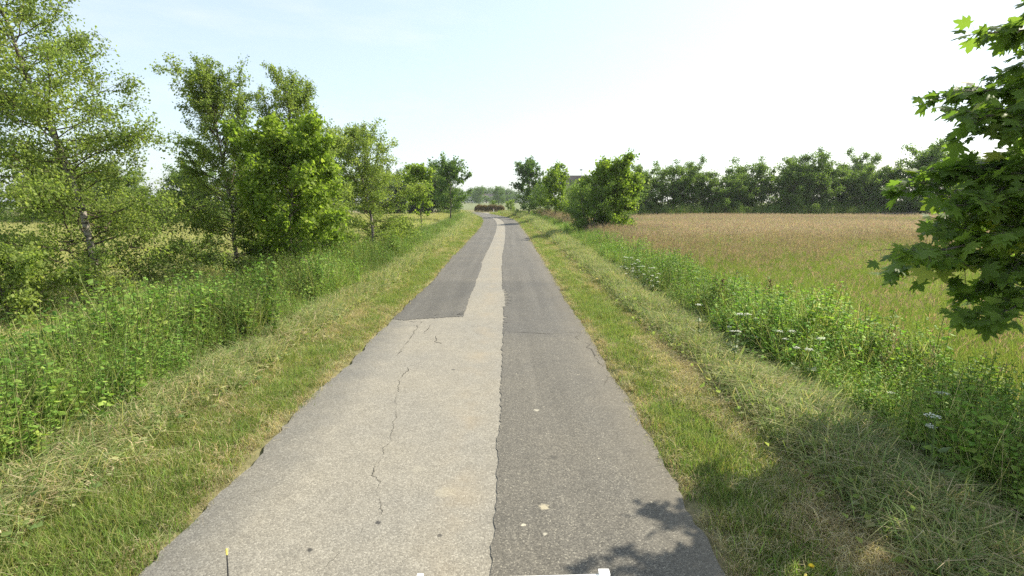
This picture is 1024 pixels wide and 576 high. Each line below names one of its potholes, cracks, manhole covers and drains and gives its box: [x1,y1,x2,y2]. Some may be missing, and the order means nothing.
crack [323,321,440,570]
